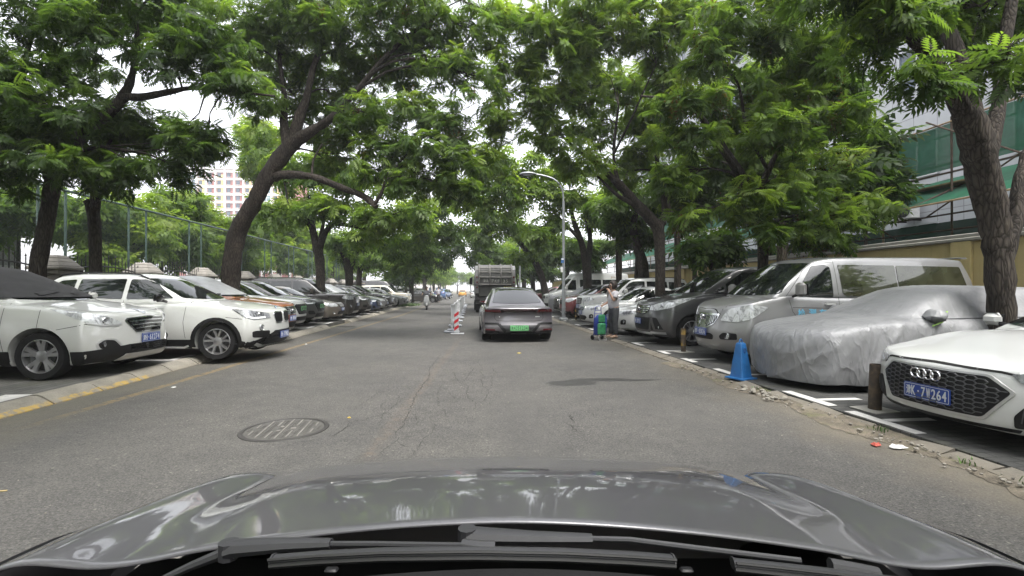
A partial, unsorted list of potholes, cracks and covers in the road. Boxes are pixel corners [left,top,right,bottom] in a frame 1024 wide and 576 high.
manhole cover [237,418,329,442]
crack [287,355,497,456]
